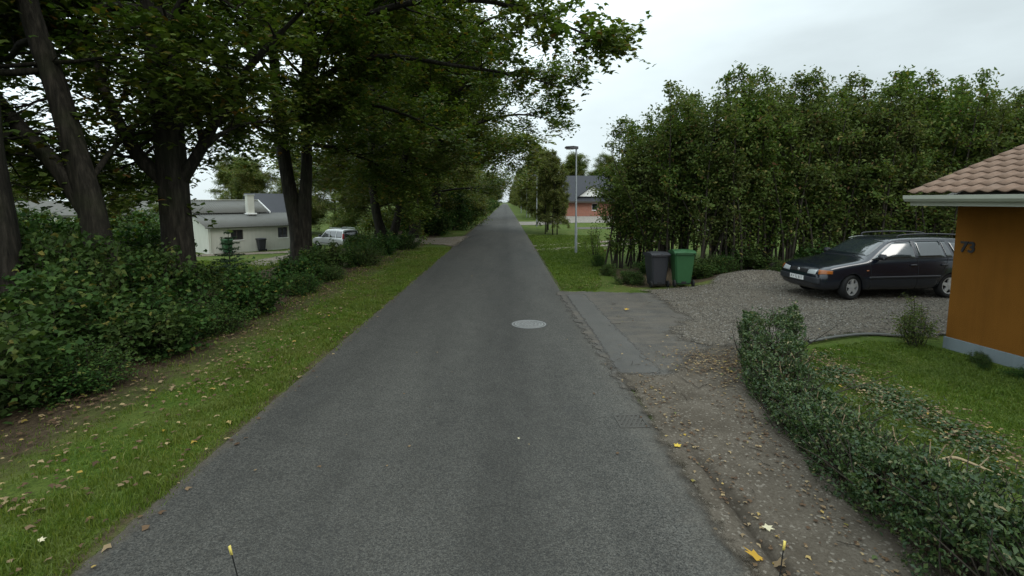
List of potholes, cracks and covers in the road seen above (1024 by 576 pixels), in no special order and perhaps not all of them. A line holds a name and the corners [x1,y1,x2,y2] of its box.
drain grate [613,414,650,428]
manhole cover [511,320,547,329]
